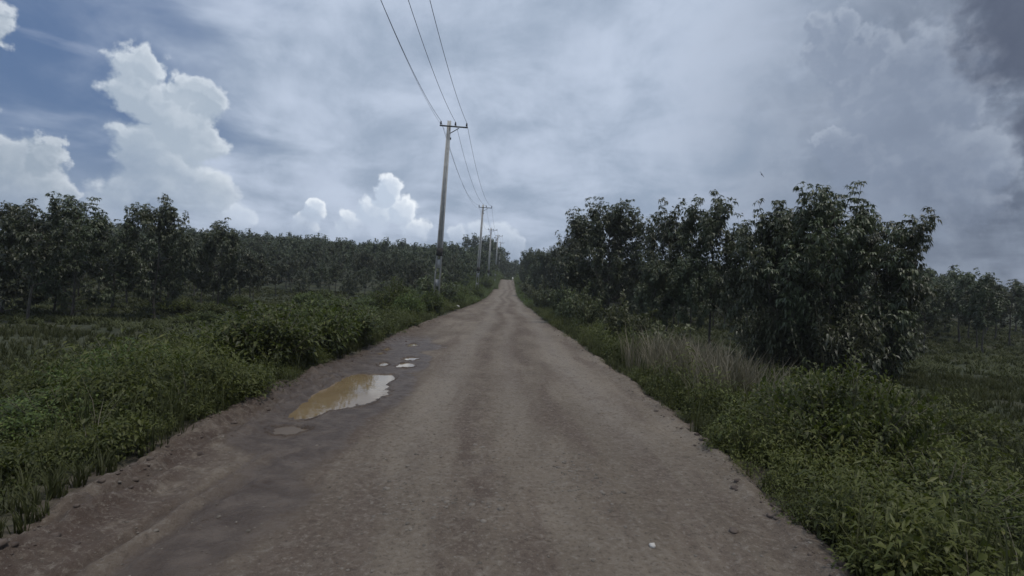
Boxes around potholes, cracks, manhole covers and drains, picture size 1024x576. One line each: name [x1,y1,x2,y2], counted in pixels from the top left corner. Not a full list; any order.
pothole [264,423,315,437]
pothole [283,372,399,422]
